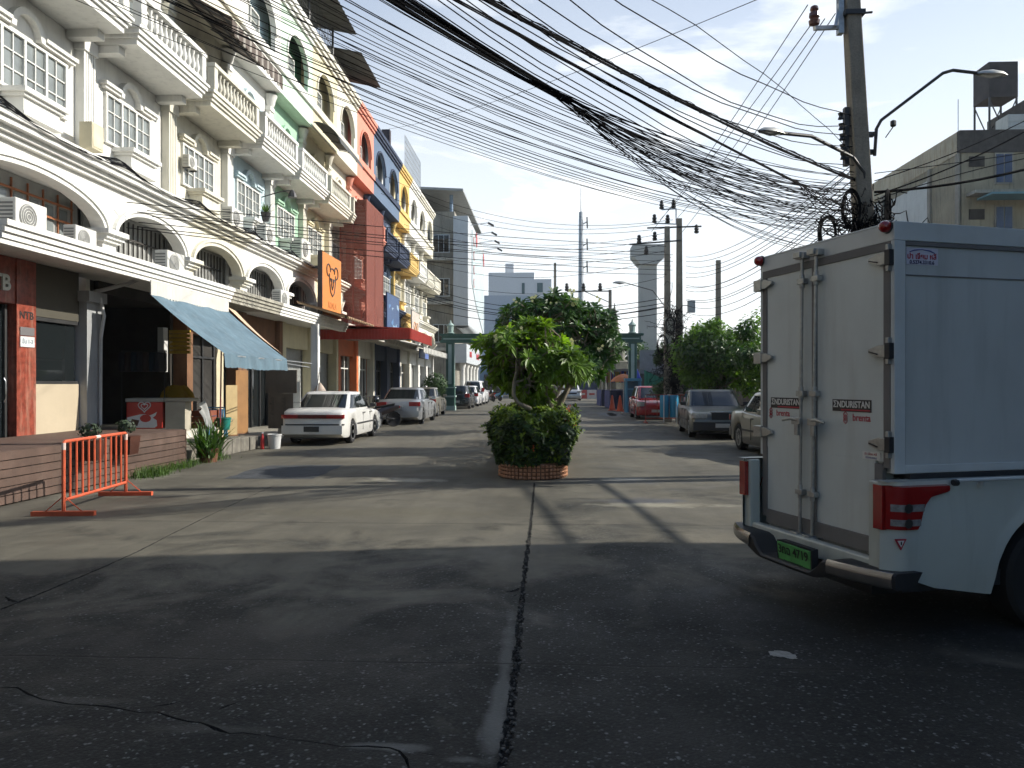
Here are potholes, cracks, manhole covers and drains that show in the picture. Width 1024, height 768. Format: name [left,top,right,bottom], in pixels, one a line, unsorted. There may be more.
crack [497,483,535,768]
crack [3,687,434,768]
